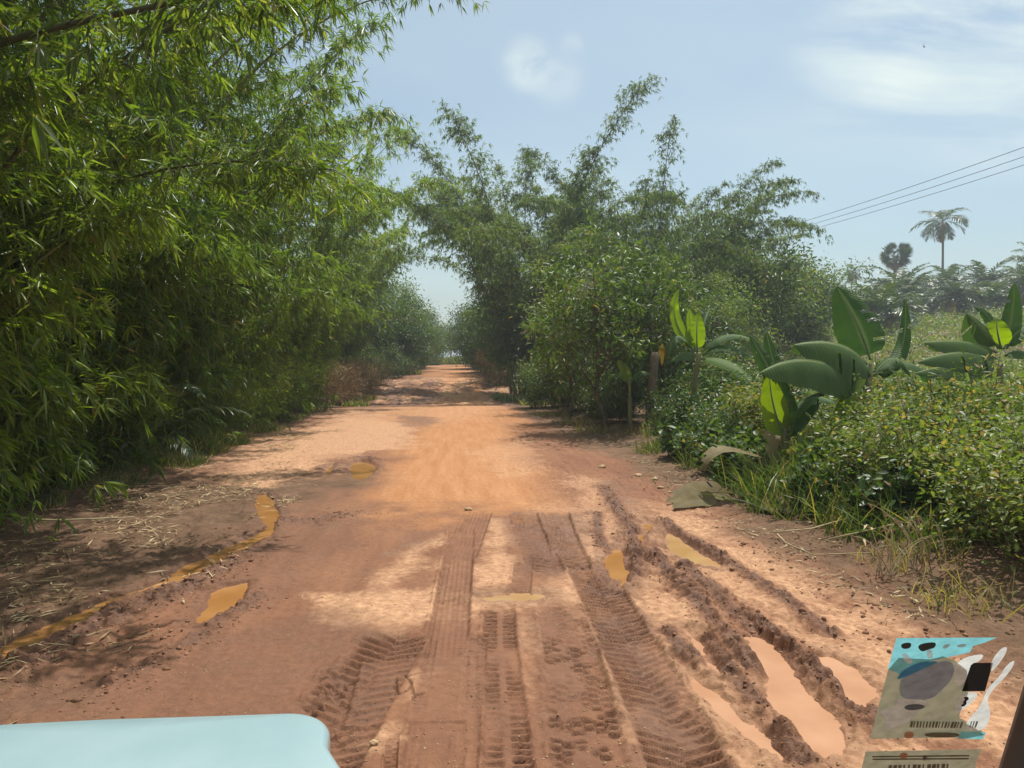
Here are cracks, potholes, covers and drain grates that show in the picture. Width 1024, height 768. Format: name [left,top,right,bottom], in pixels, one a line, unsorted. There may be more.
pothole [341,458,385,480]
pothole [594,536,643,589]
